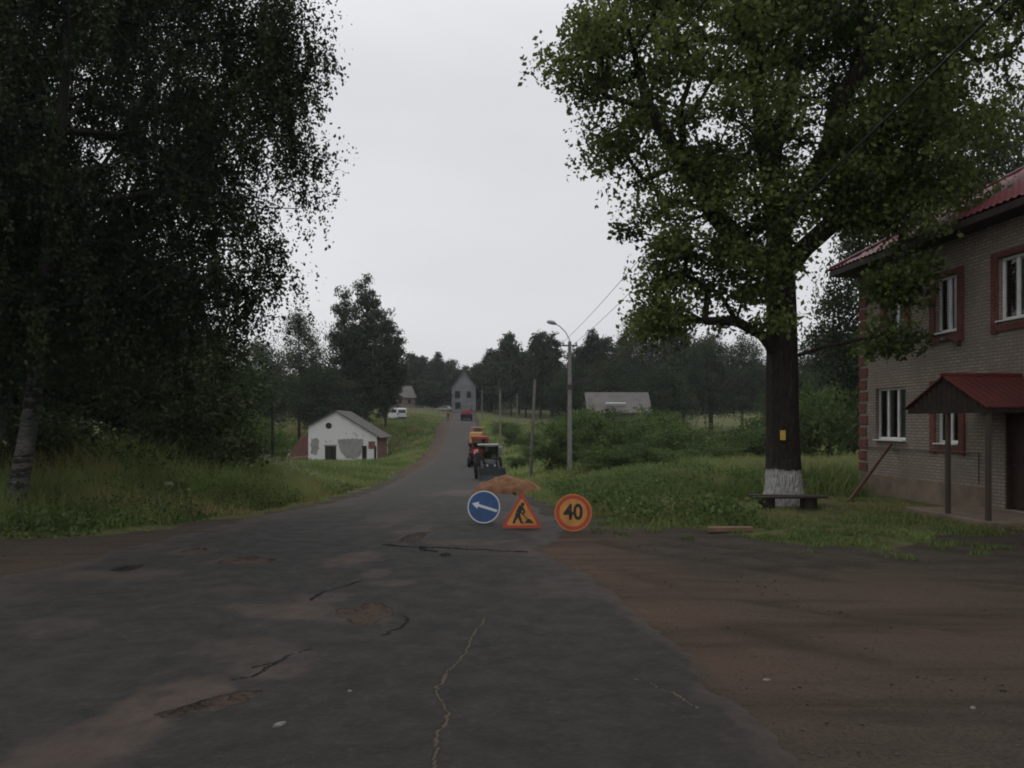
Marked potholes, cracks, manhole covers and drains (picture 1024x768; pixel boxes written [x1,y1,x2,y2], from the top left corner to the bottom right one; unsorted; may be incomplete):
crack [633,678,701,708]
pothole [399,532,431,544]
crack [309,580,362,601]
crack [231,647,314,681]
crack [430,616,487,768]
pothole [335,602,393,625]
pothole [215,555,277,565]
crack [382,615,410,636]
pothole [154,690,264,719]
crack [381,544,529,553]
